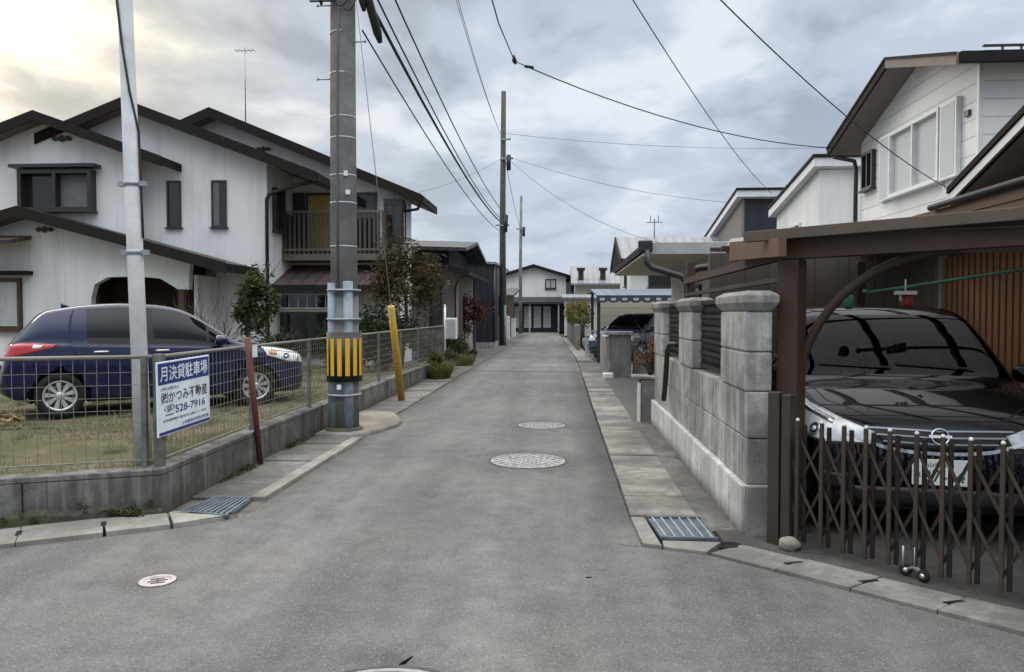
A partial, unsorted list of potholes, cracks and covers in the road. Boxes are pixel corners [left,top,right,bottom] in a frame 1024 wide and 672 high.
drain grate [178,496,253,519]
drain grate [647,515,718,542]
manhole cover [488,453,568,469]
manhole cover [137,574,177,588]
